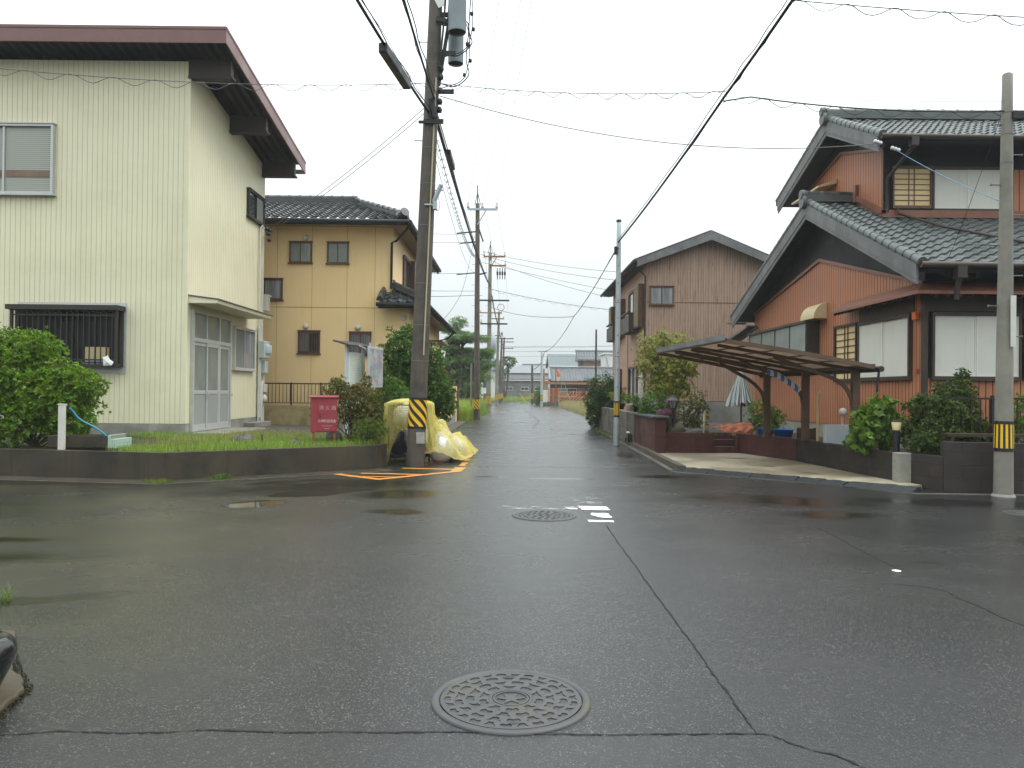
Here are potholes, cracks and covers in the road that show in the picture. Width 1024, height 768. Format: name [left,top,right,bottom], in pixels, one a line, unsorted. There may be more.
crack [0,728,865,768]
manhole cover [431,669,591,736]
manhole cover [512,510,576,521]
crack [882,583,1024,625]
crack [813,525,900,568]
